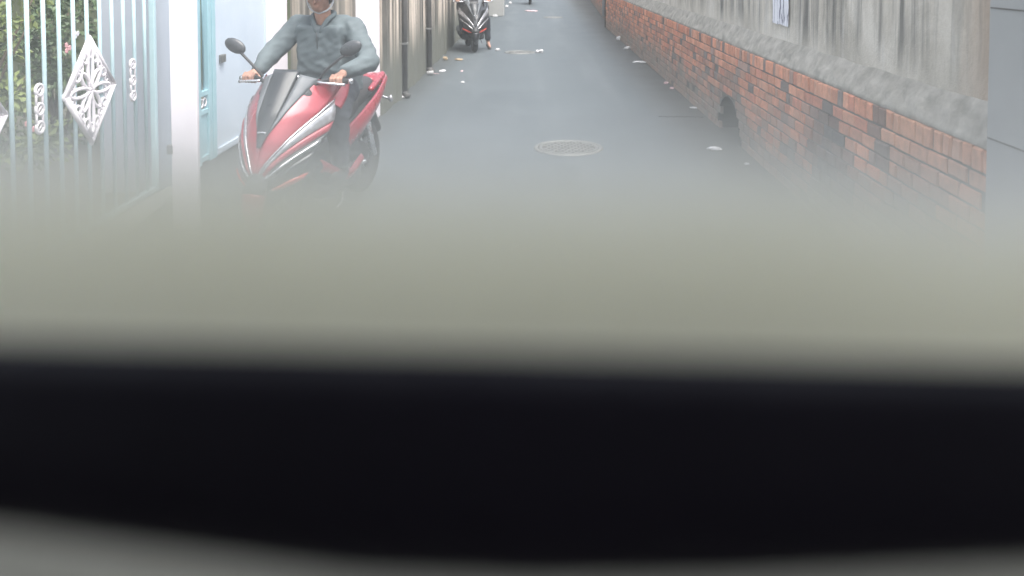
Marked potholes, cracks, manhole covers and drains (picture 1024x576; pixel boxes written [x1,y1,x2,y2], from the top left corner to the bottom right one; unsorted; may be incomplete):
manhole cover [534,140,603,156]
